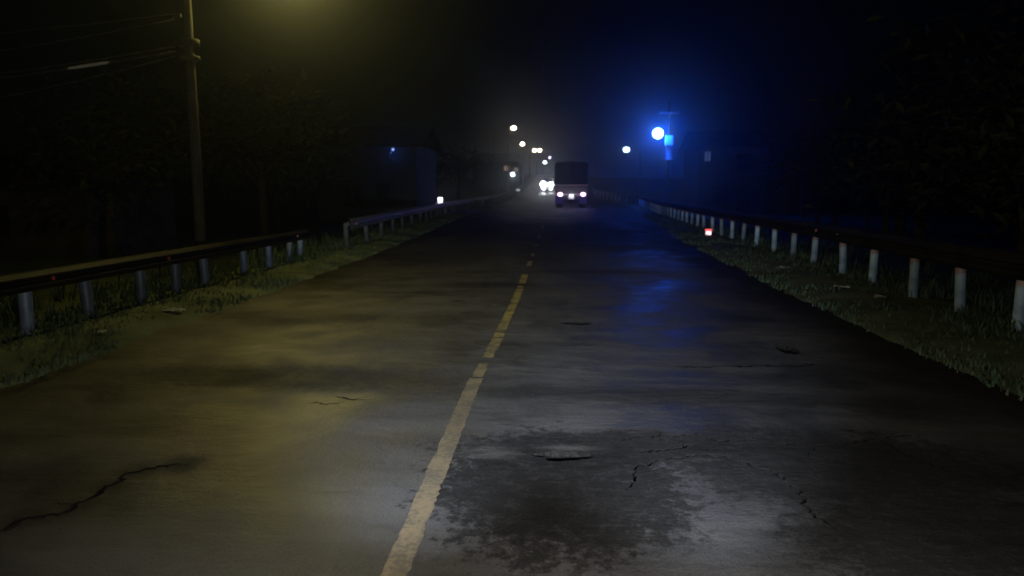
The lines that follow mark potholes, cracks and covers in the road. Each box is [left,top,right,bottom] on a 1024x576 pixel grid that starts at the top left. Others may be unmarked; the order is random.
crack [0,463,188,533]
pothole [532,450,594,461]
crack [621,428,969,534]
crack [306,396,376,407]
pothole [775,346,800,354]
